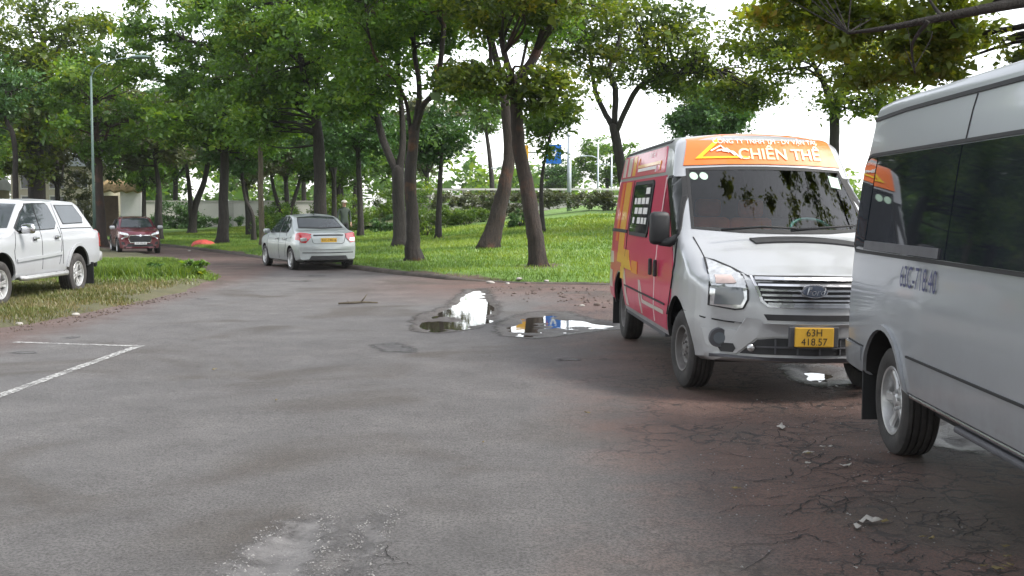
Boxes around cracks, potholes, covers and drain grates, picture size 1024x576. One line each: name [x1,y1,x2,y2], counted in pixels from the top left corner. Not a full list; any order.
crack [378,545,419,565]
crack [692,402,1024,576]
pothole [495,311,620,339]
pothole [408,288,501,333]
